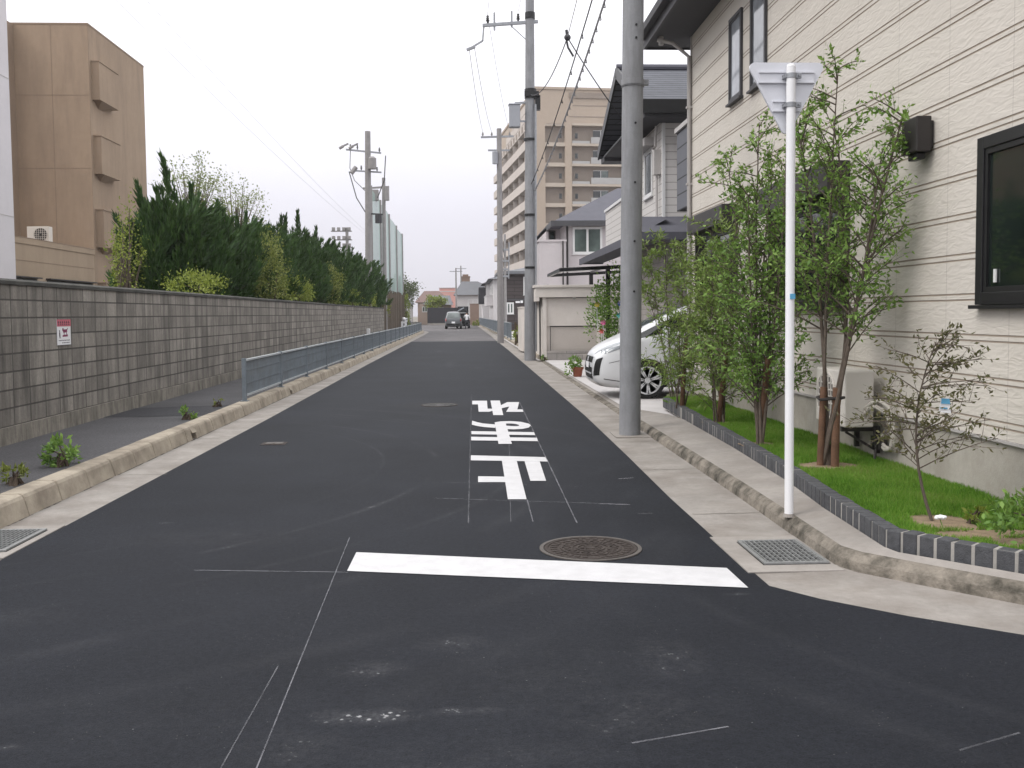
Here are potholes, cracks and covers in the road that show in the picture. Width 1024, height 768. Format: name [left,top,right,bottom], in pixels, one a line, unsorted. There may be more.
drain grate [737,539,829,565]
manhole cover [540,536,642,561]
drain grate [0,528,47,552]
